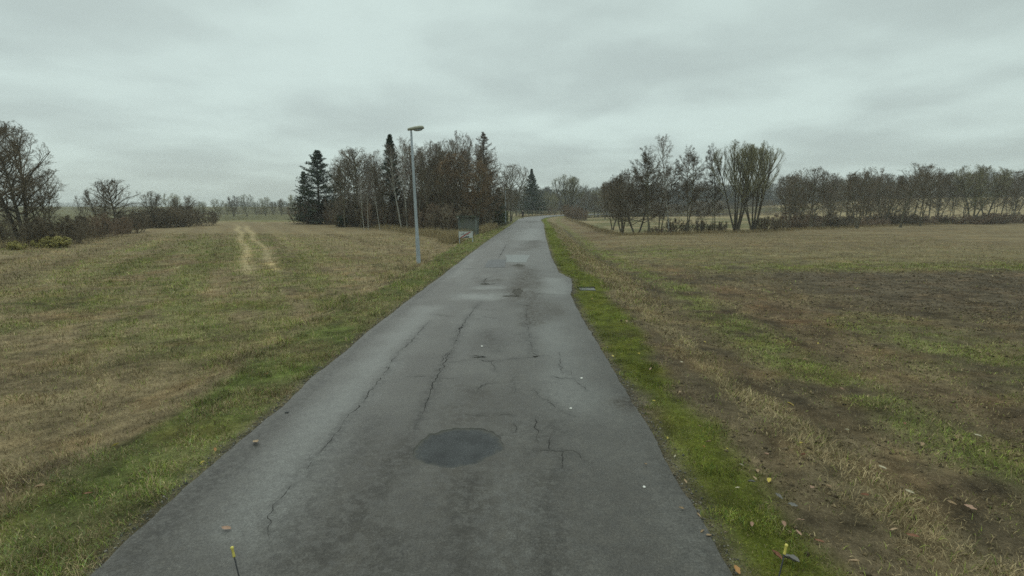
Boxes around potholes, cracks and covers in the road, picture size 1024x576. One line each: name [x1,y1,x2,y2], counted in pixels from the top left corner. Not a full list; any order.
crack [306,307,540,470]
crack [534,391,581,474]
